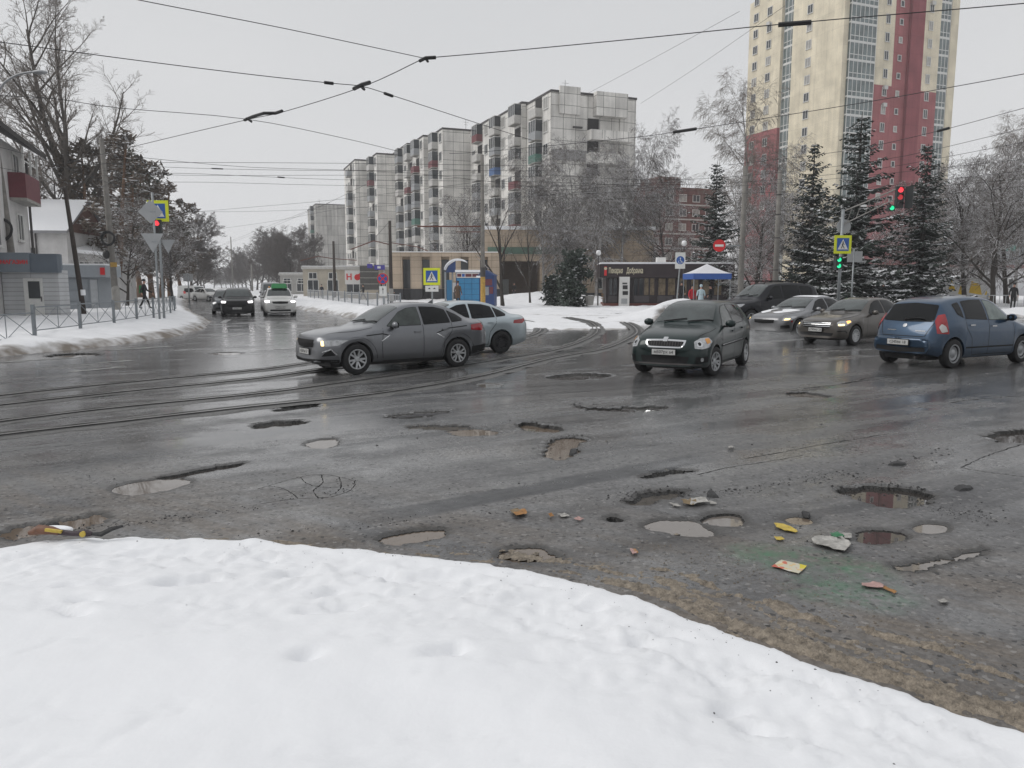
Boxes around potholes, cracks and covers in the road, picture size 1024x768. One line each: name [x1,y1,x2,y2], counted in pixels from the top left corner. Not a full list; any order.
pothole [253,420,308,429]
crack [698,455,802,475]
pothole [700,513,745,527]
pothole [891,549,988,573]
crack [259,474,356,504]
pothole [386,411,450,419]
pothole [835,486,936,509]
pothole [497,547,563,563]
pothole [0,514,109,541]
pothole [982,429,1024,443]
pothole [856,530,909,545]
